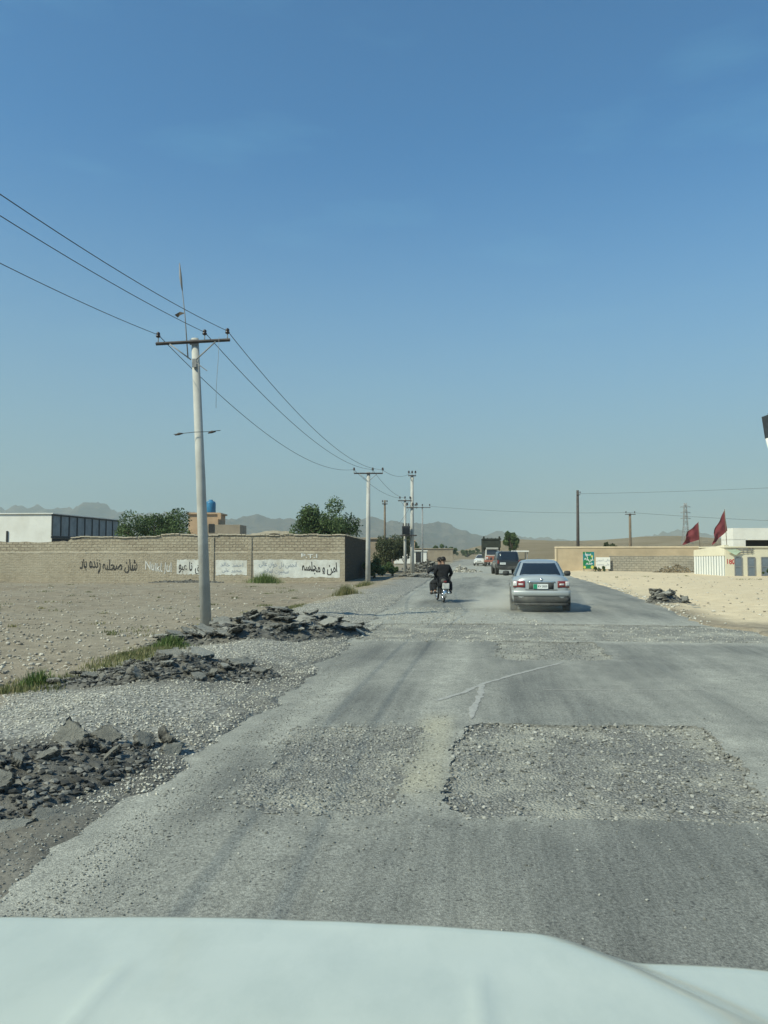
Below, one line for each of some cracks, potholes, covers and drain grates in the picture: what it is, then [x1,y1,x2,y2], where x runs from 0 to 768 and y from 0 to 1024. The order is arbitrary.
crack [436,662,654,719]
pothole [205,721,430,817]
pothole [440,722,768,825]
